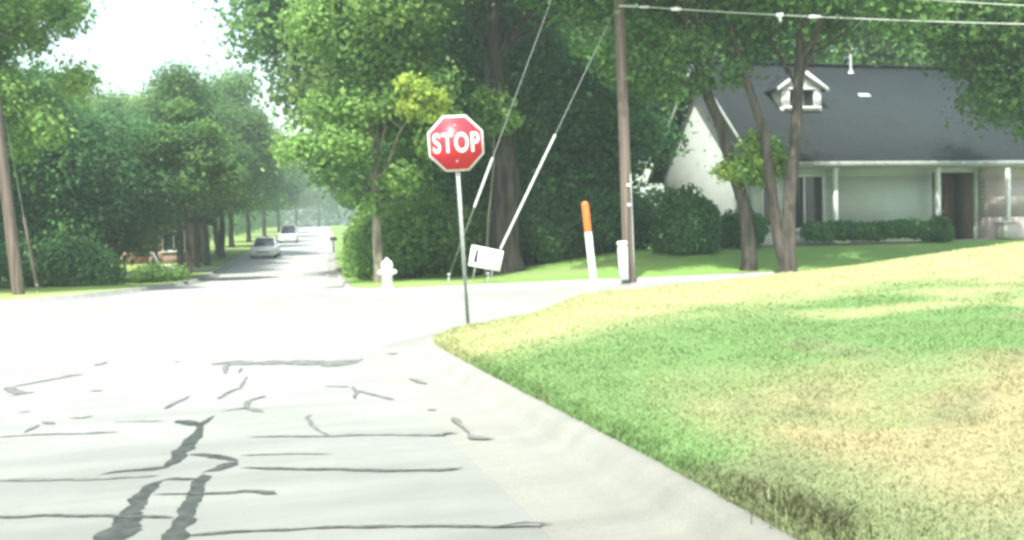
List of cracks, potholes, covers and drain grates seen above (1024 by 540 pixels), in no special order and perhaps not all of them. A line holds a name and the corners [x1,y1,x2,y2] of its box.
crack [0,361,189,437]
crack [339,378,427,400]
crack [0,475,277,494]
crack [243,408,490,472]
crack [217,377,266,411]
